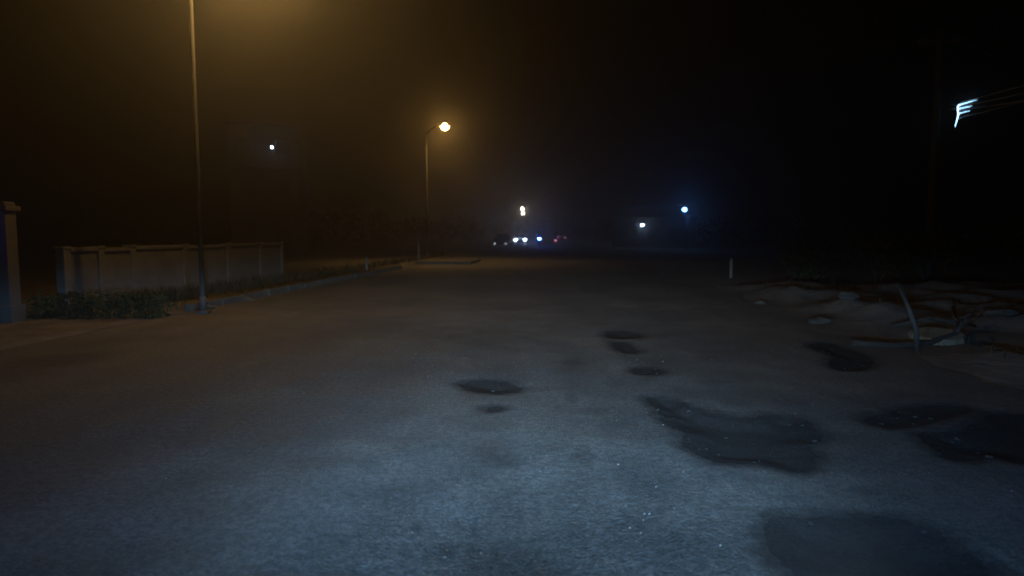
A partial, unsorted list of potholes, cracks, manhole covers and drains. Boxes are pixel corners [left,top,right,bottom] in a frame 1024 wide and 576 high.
pothole [808,343,875,371]
pothole [917,414,1024,464]
pothole [604,331,642,339]
pothole [611,342,640,354]
pothole [629,367,665,375]
pothole [864,405,973,429]
pothole [459,380,522,394]
pothole [644,397,822,473]
